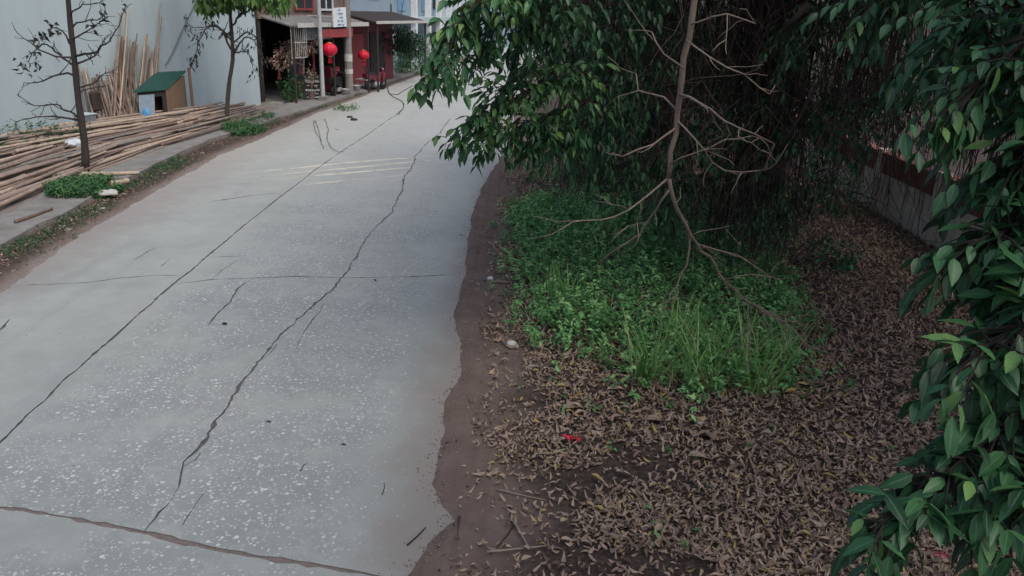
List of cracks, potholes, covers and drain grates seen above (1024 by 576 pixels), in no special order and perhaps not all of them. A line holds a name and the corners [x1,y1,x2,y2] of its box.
crack [0,110,453,576]
